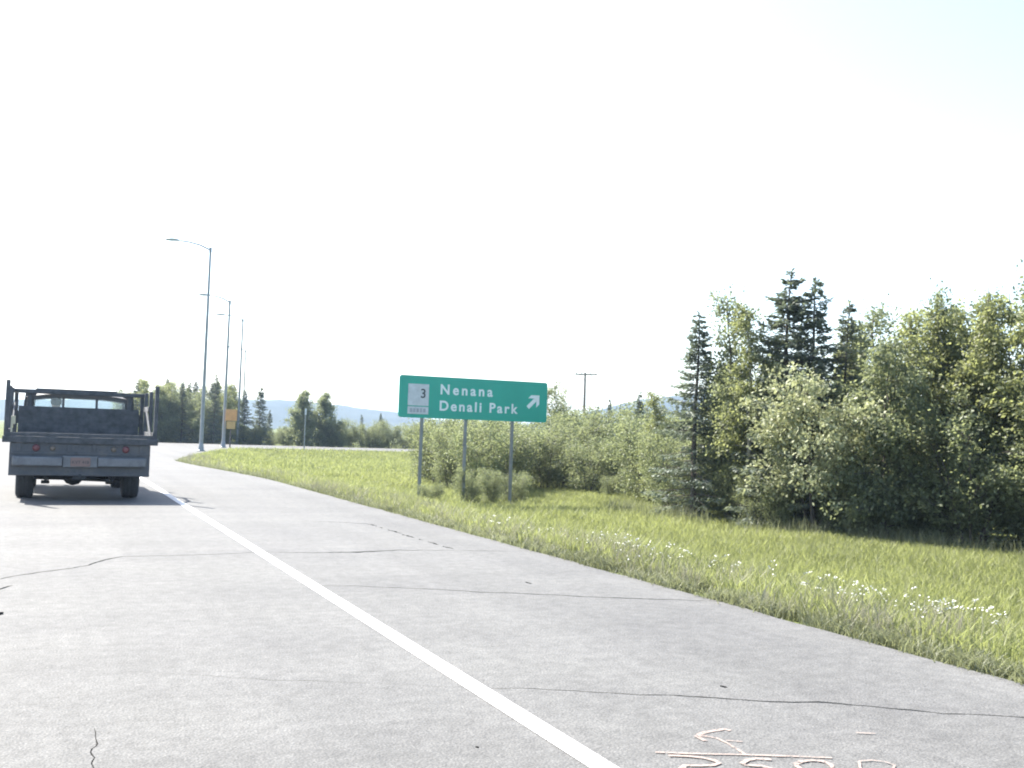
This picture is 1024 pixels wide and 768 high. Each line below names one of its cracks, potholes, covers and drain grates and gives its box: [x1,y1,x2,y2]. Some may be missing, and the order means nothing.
crack [503,688,1024,718]
crack [1,521,453,589]
crack [366,586,691,601]
